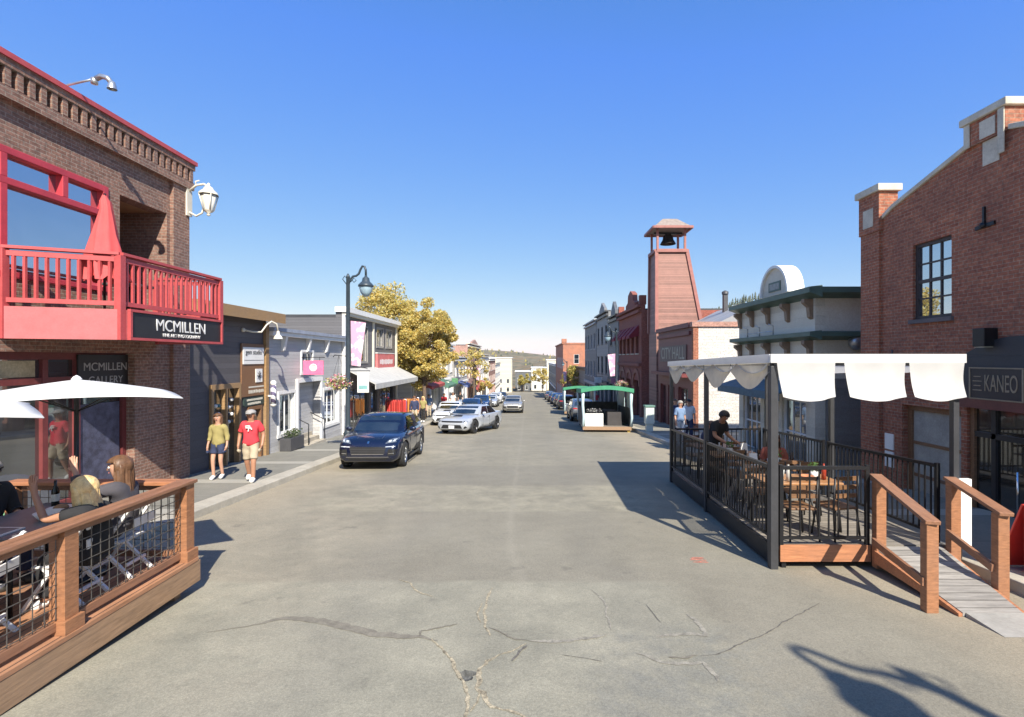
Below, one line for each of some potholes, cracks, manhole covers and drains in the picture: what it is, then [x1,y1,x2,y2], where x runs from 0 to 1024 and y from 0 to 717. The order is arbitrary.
crack [470,587,611,717]
pothole [460,670,477,681]
crack [636,603,819,681]
